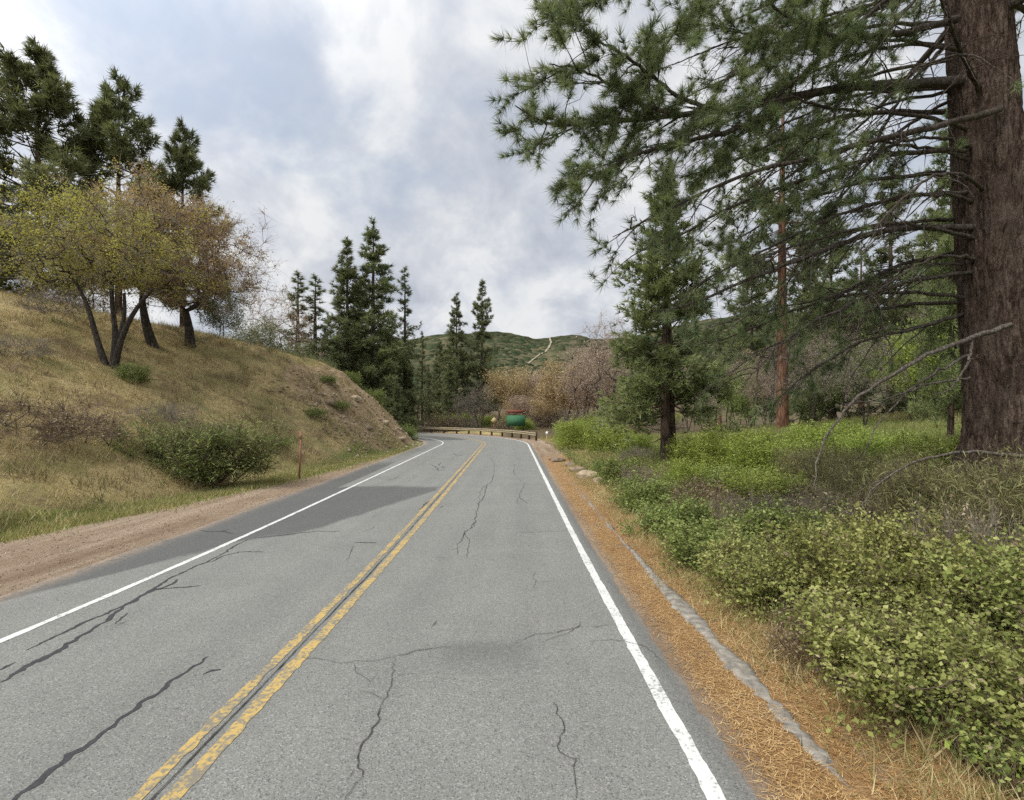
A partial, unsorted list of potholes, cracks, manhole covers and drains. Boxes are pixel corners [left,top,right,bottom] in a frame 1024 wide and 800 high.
crack [455,463,495,558]
crack [553,702,579,795]
crack [304,646,444,798]
